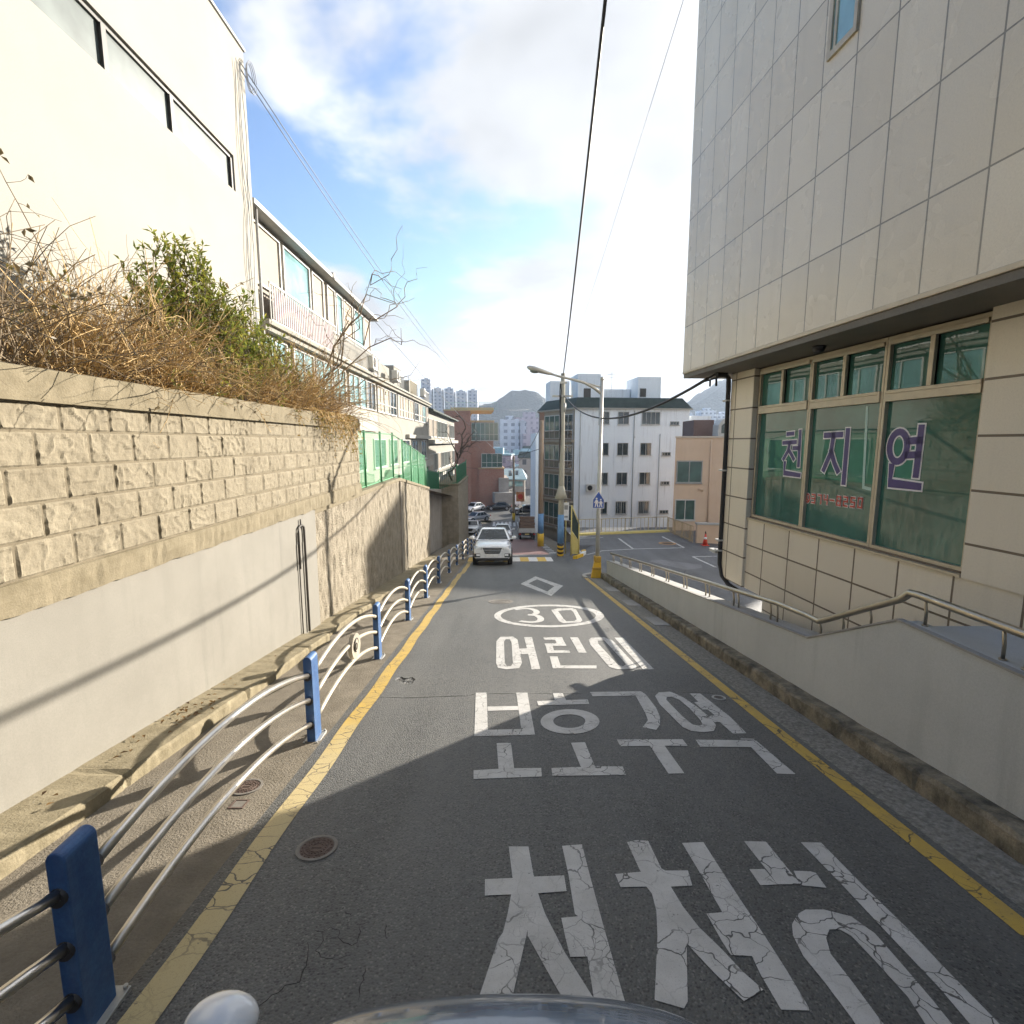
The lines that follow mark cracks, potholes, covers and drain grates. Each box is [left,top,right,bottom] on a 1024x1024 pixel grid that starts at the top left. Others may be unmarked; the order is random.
manhole cover [233,778,263,795]
manhole cover [295,835,338,862]
crack [258,911,367,1007]
